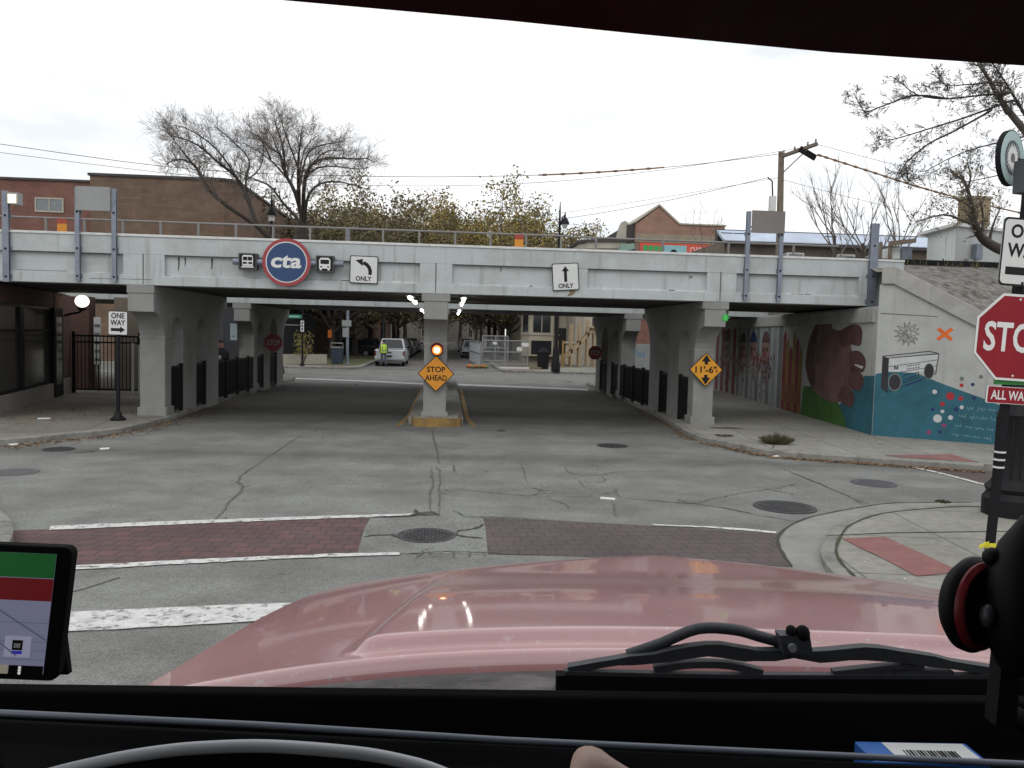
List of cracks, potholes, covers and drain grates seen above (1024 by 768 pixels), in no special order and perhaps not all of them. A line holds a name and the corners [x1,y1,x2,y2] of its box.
manhole cover [850,479,898,488]
crack [213,437,298,520]
manhole cover [397,528,456,543]
manhole cover [0,468,39,476]
manhole cover [753,500,817,514]
crack [364,429,793,558]
